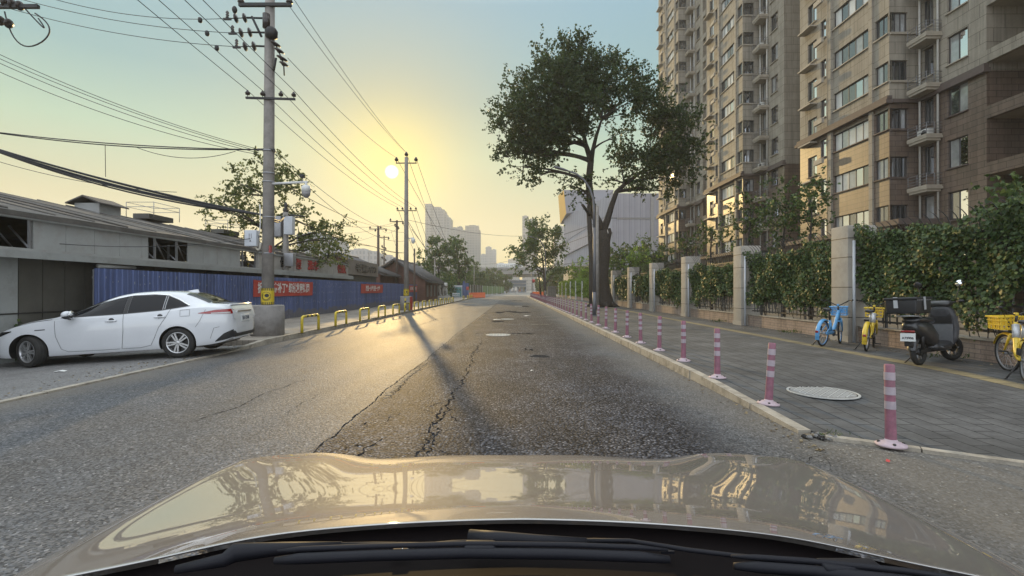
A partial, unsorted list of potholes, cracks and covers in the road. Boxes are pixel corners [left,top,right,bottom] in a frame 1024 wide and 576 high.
crack [409,347,478,457]
manhole cover [786,387,861,400]
